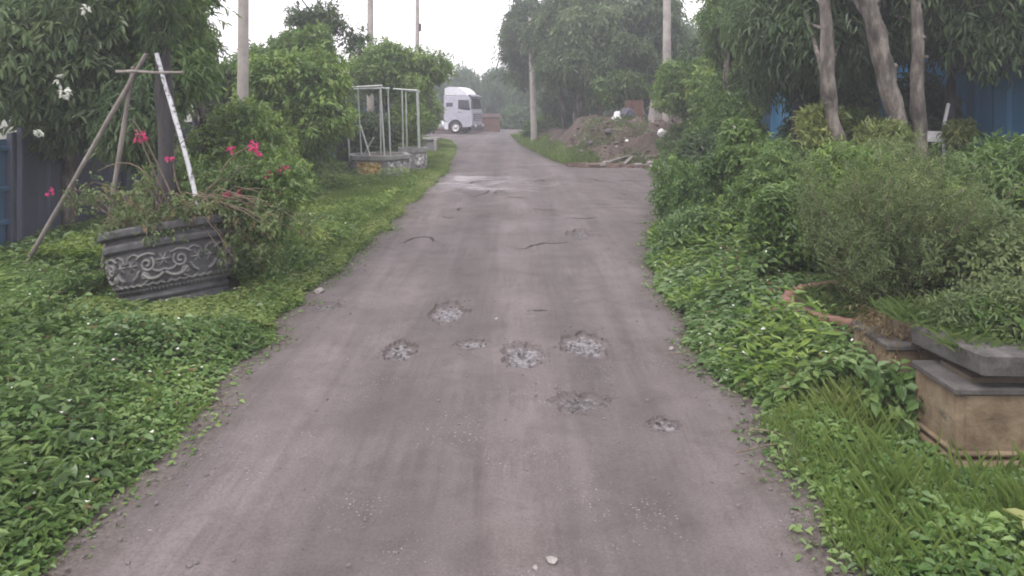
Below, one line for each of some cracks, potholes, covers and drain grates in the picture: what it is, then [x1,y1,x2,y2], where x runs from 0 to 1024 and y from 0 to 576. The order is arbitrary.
pothole [534,388,619,418]
pothole [445,337,499,351]
pothole [376,335,425,364]
pothole [420,297,478,330]
pothole [641,413,688,437]
pothole [493,337,559,374]
crack [398,178,646,243]
crack [516,241,575,249]
pothole [551,326,619,363]
